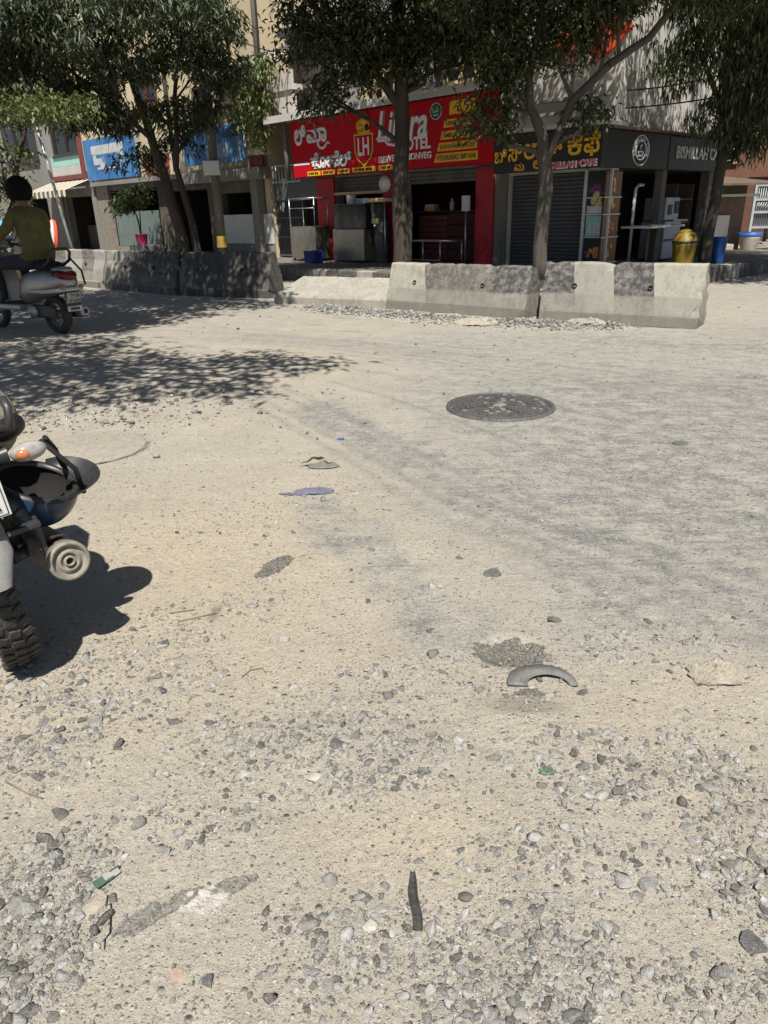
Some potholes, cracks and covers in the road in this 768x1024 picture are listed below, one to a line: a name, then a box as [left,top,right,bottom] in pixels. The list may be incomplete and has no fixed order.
manhole cover [446,393,556,422]
pothole [471,637,549,668]
